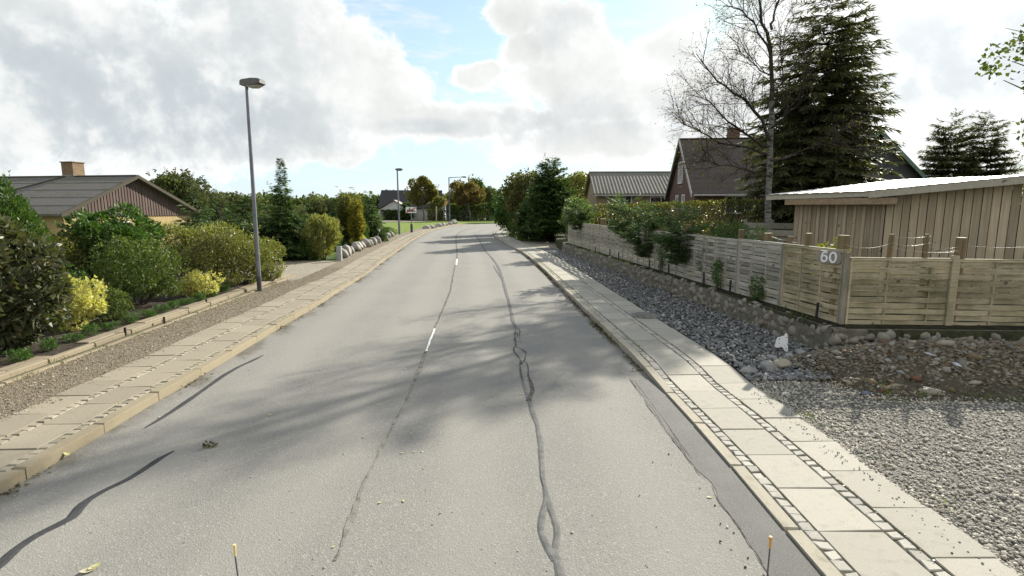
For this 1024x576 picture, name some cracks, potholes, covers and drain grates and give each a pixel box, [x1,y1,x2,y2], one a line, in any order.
crack [630,379,767,571]
crack [333,228,469,560]
